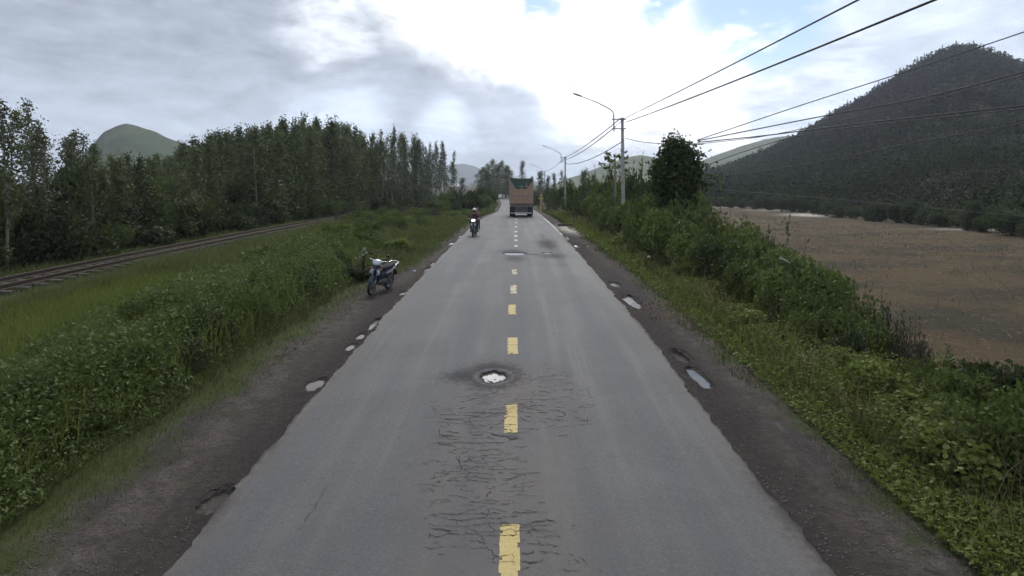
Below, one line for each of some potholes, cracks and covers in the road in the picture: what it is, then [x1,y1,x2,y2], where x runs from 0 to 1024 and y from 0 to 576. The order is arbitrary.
crack [419,368,596,569]
pothole [294,375,332,394]
pothole [663,347,699,364]
pothole [178,481,238,522]
pothole [620,293,647,310]
pothole [471,367,517,386]
